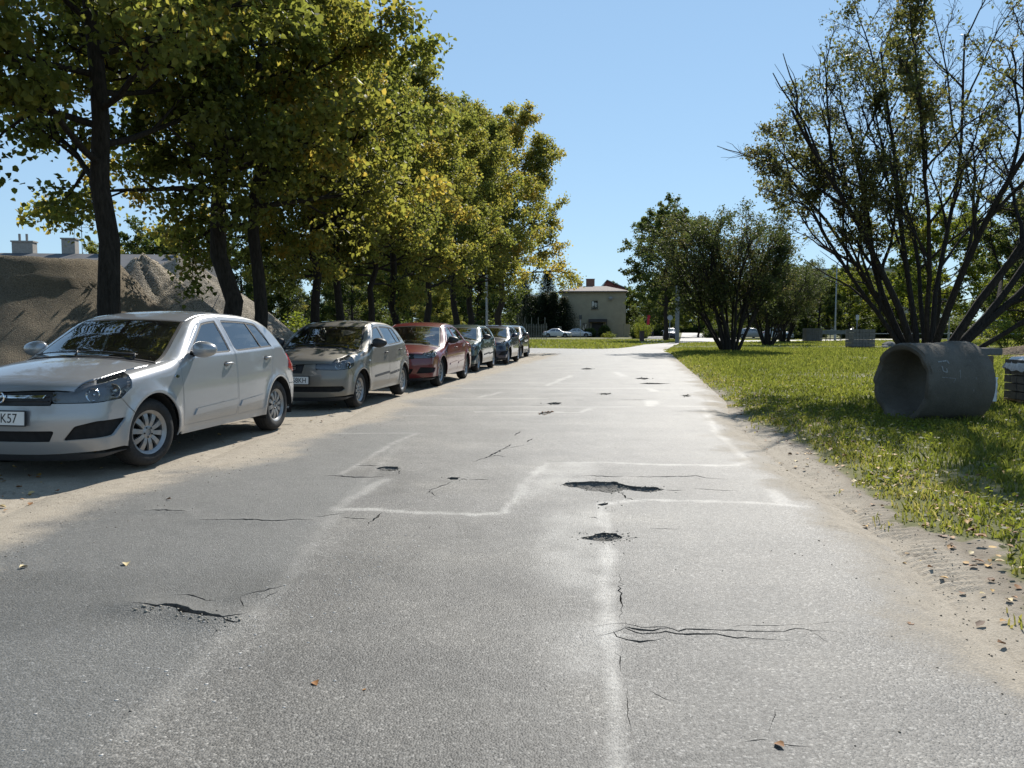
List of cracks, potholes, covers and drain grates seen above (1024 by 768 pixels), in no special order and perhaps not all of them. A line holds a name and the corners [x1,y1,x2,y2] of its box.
crack [429,432,532,529]
crack [205,513,381,524]
pothole [574,530,638,545]
crack [569,574,844,736]
pothole [560,479,677,494]
